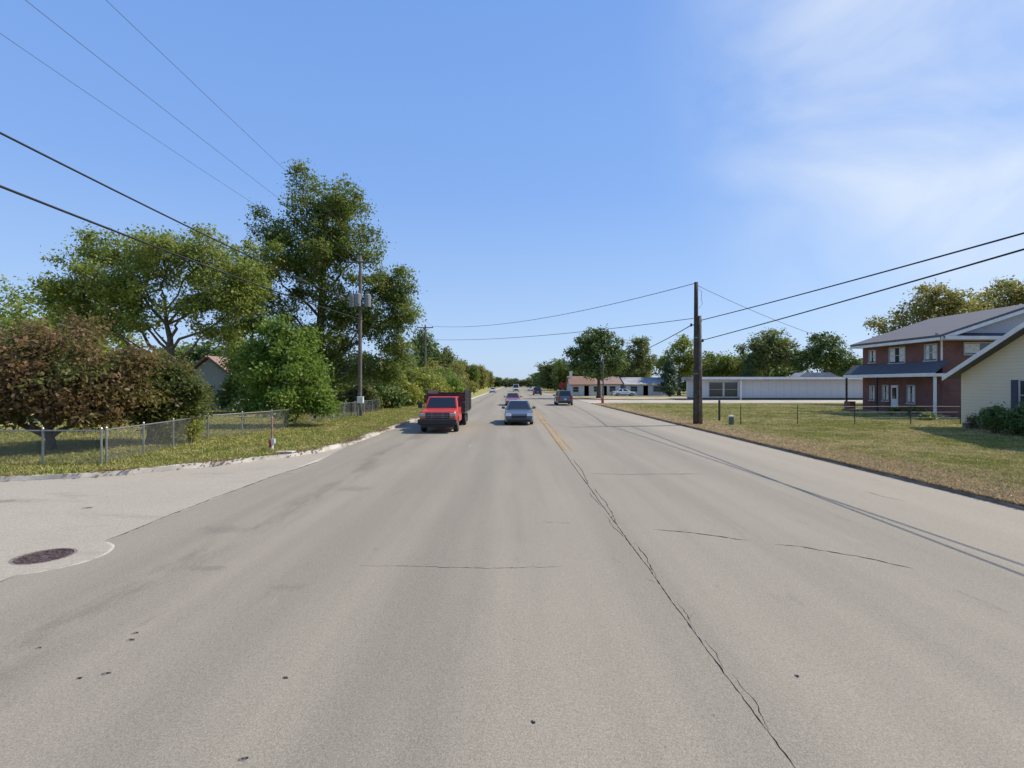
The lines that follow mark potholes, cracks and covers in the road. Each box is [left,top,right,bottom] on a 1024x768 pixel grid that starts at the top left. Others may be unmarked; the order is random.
manhole cover [8,548,78,565]
